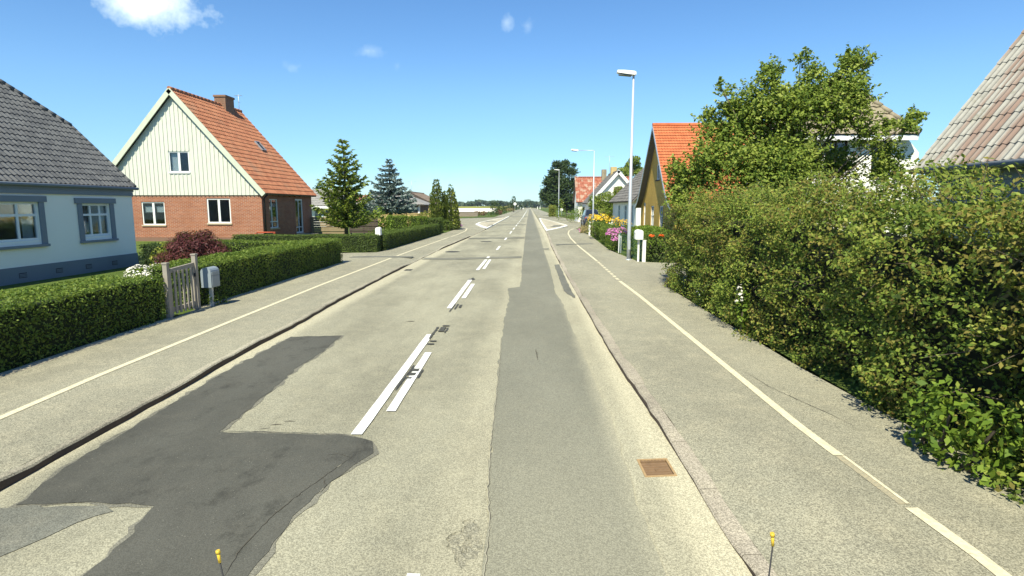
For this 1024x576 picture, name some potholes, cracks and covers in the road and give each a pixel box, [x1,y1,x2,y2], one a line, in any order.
drain grate [637,458,677,477]
